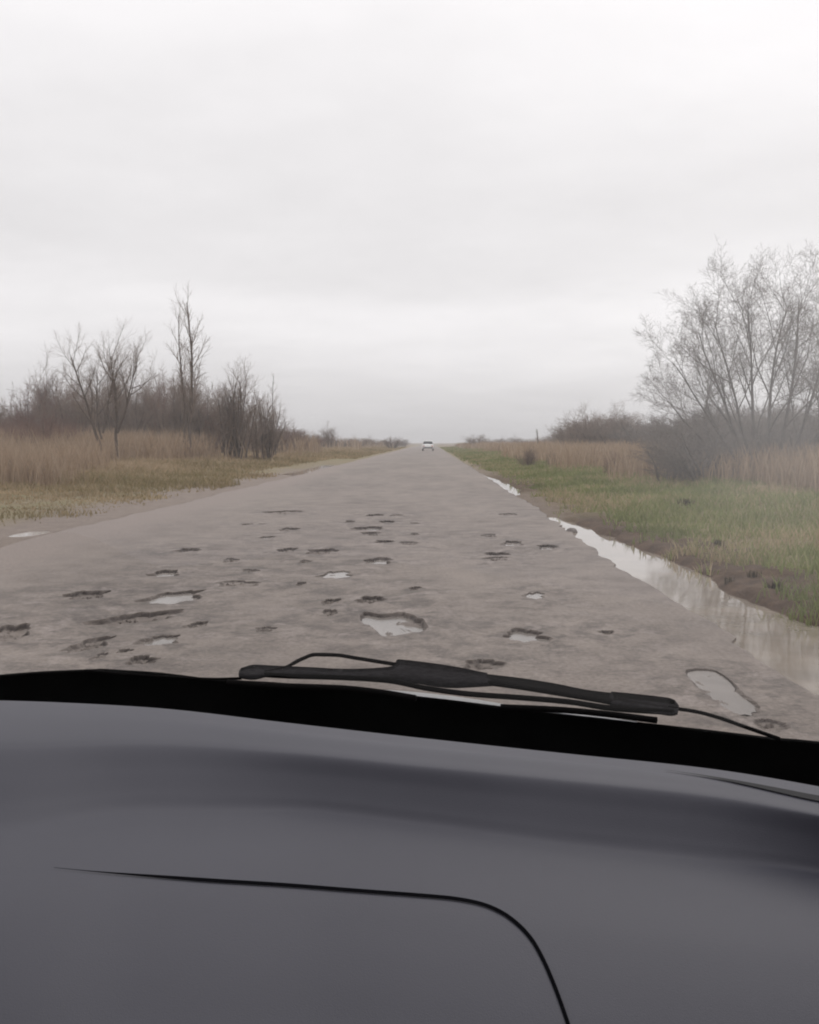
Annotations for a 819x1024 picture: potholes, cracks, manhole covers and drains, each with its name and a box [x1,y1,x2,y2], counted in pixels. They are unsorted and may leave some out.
pothole [134,589,207,604]
pothole [125,655,161,665]
pothole [0,623,32,642]
pothole [132,634,180,645]
pothole [360,612,429,636]
pothole [60,636,116,653]
pothole [81,609,185,626]
pothole [685,668,761,716]
pothole [502,628,554,642]
pothole [521,591,545,599]
pothole [62,590,111,600]
pothole [313,570,353,578]
